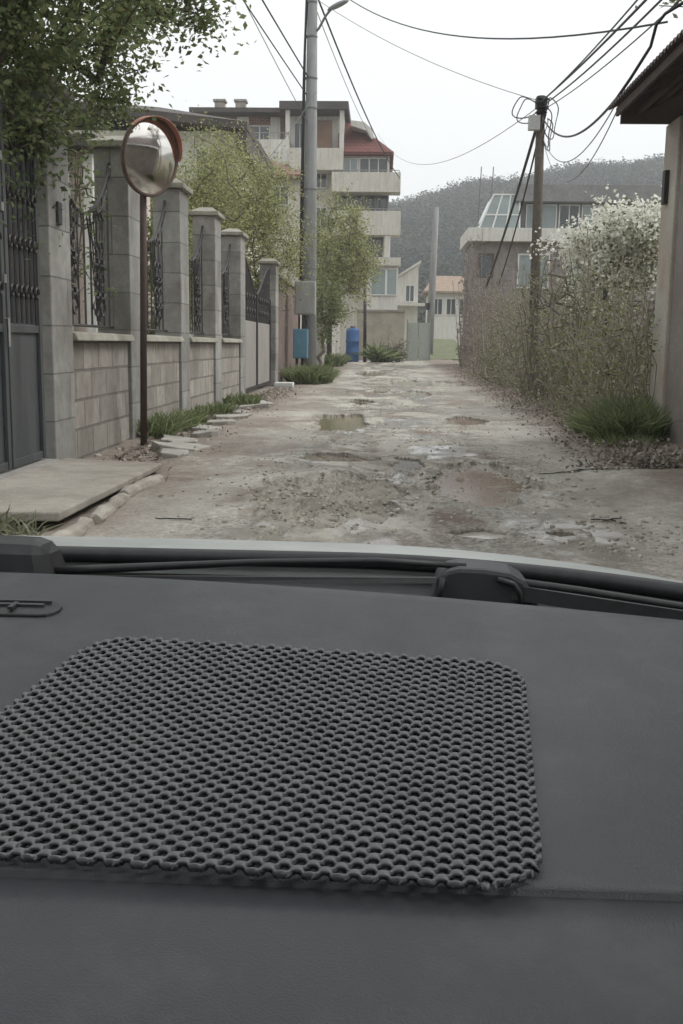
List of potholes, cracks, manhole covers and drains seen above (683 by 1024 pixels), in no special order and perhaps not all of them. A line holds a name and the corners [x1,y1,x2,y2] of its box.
pothole [343,398,380,407]
pothole [234,467,424,539]
pothole [286,452,400,465]
pothole [528,528,595,543]
pothole [437,415,496,427]
pothole [308,412,377,435]
pothole [392,390,436,400]
pothole [427,525,526,544]
pothole [408,457,559,519]
